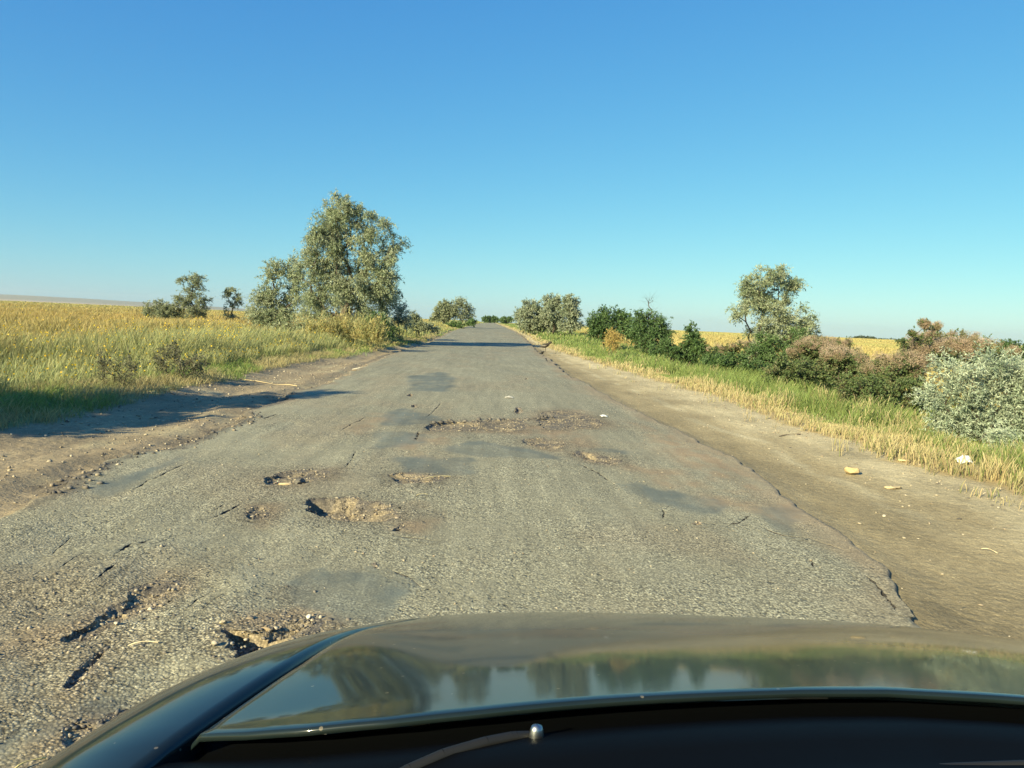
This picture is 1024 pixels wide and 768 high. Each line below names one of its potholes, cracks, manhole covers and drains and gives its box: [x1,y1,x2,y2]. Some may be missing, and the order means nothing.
pothole [254,468,338,488]
pothole [204,611,341,665]
pothole [233,502,281,522]
crack [197,502,252,521]
pothole [566,450,629,466]
crack [35,534,167,587]
pothole [295,494,412,525]
pothole [379,471,457,486]
crack [409,402,444,441]
crack [334,416,372,431]
crack [714,512,856,571]
pothole [515,437,573,451]
